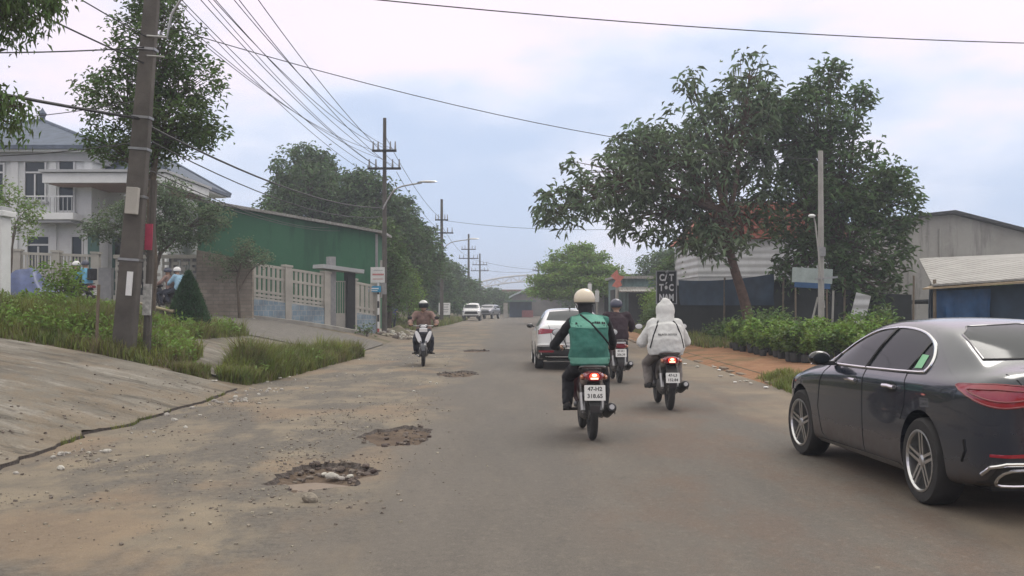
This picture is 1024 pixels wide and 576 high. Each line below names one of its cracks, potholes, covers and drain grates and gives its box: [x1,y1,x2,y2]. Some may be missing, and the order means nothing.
pothole [262,460,381,493]
pothole [356,425,433,447]
crack [0,388,237,470]
